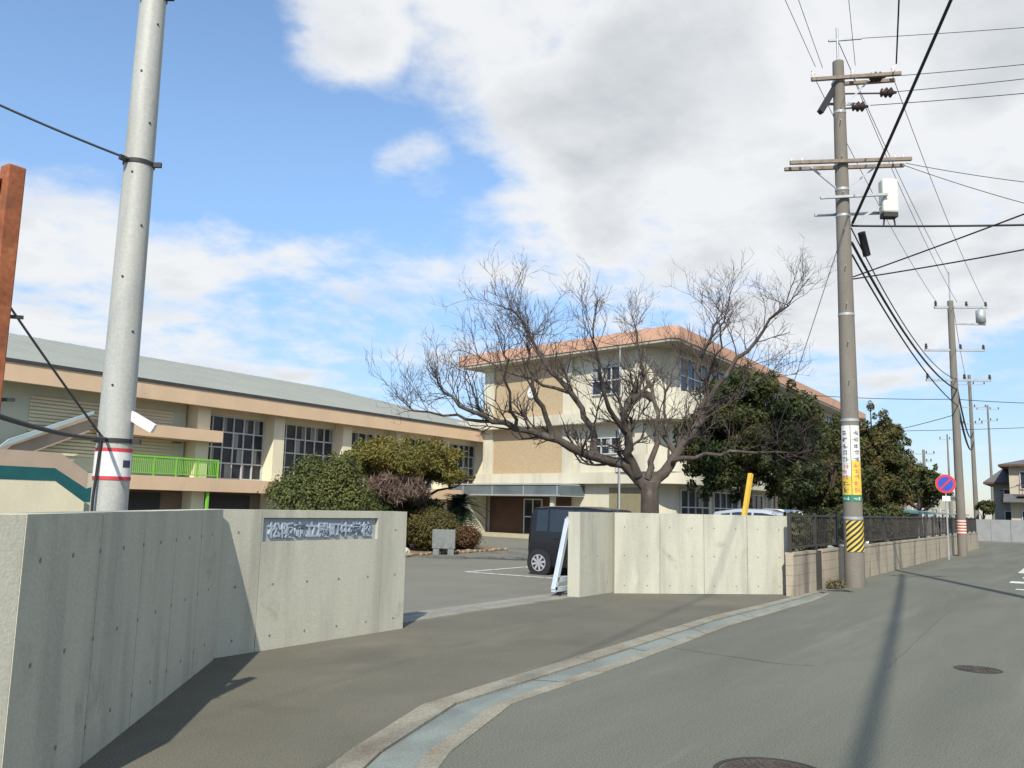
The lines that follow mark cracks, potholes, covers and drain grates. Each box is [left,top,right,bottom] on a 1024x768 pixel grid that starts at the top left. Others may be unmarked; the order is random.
manhole cover [954,665,1003,674]
manhole cover [713,757,816,768]
